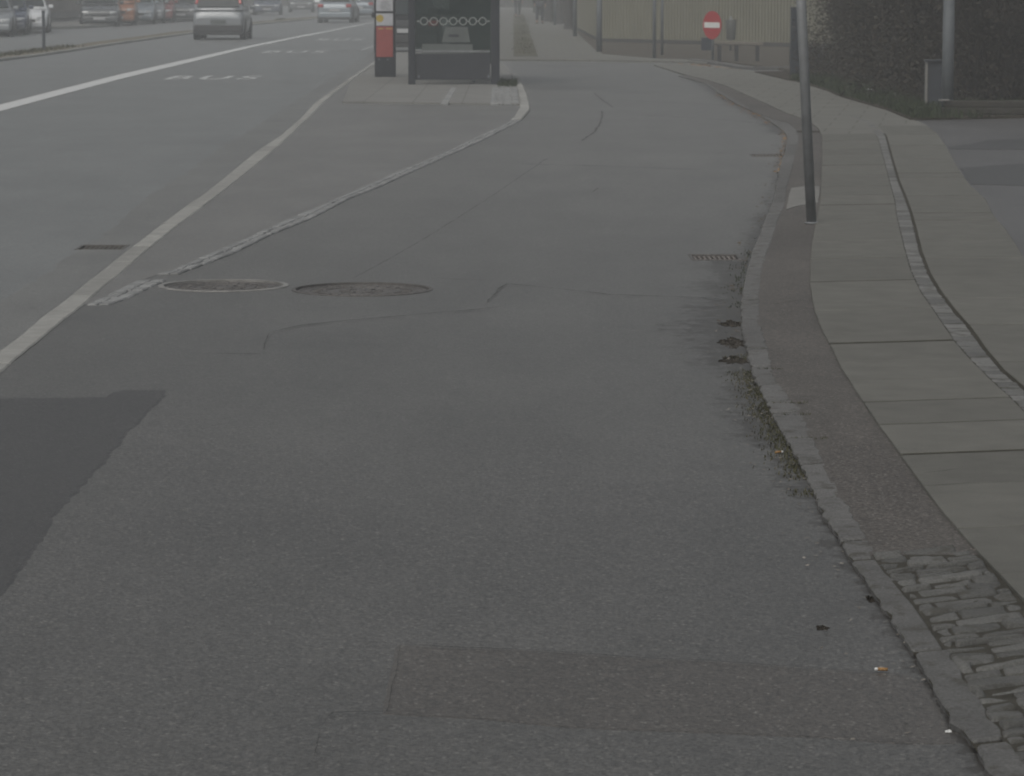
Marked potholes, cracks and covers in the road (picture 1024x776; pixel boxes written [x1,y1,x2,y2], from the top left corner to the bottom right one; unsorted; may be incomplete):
manhole cover [158,279,289,292]
manhole cover [291,282,433,297]
